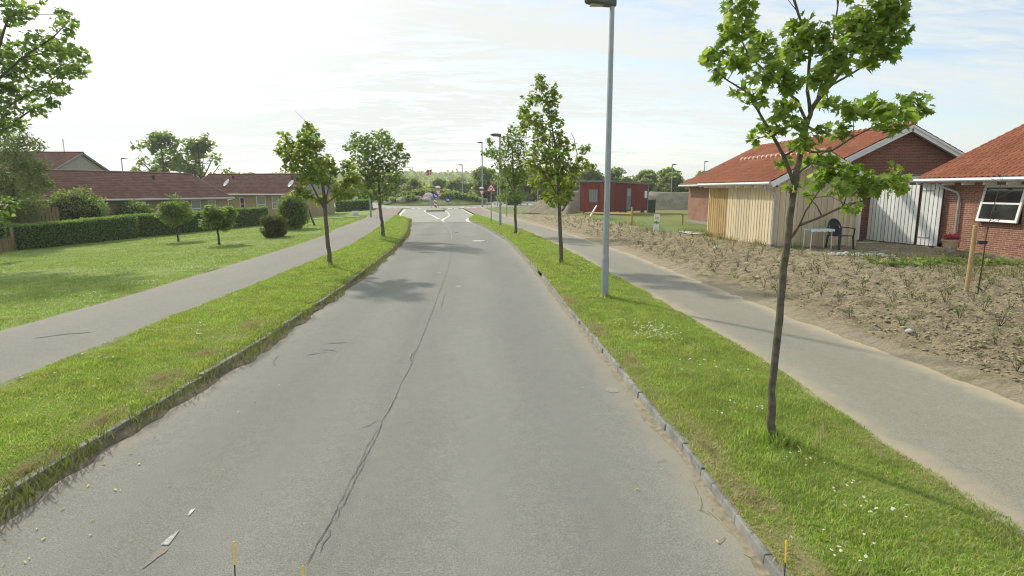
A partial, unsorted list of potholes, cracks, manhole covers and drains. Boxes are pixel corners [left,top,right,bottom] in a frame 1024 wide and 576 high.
crack [307,381,421,564]
